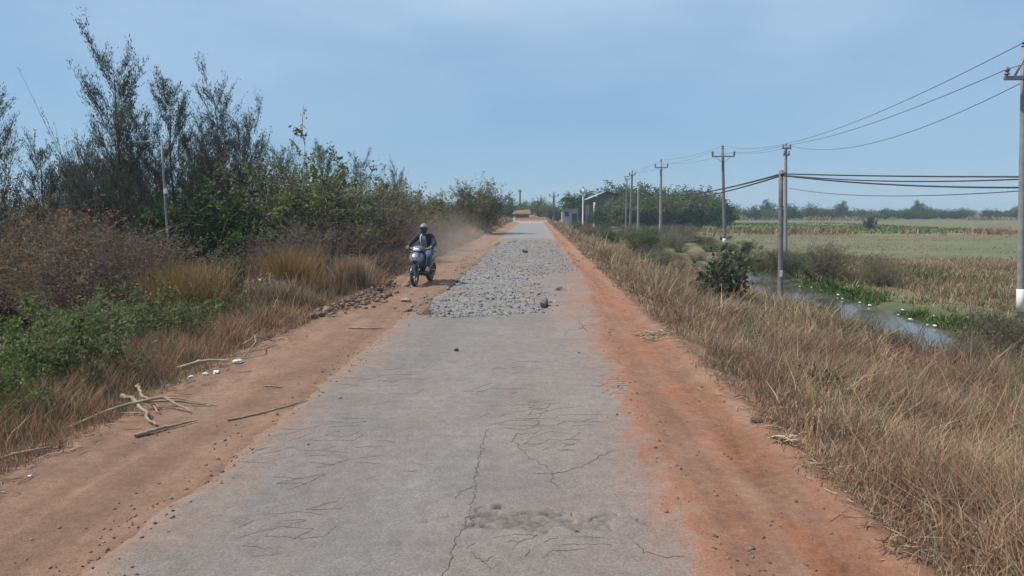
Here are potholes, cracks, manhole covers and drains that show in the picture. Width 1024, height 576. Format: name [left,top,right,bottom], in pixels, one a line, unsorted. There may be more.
pothole [441,507,636,534]
crack [240,501,336,557]
crack [442,360,612,575]
crack [257,418,395,490]
crack [343,368,431,406]
